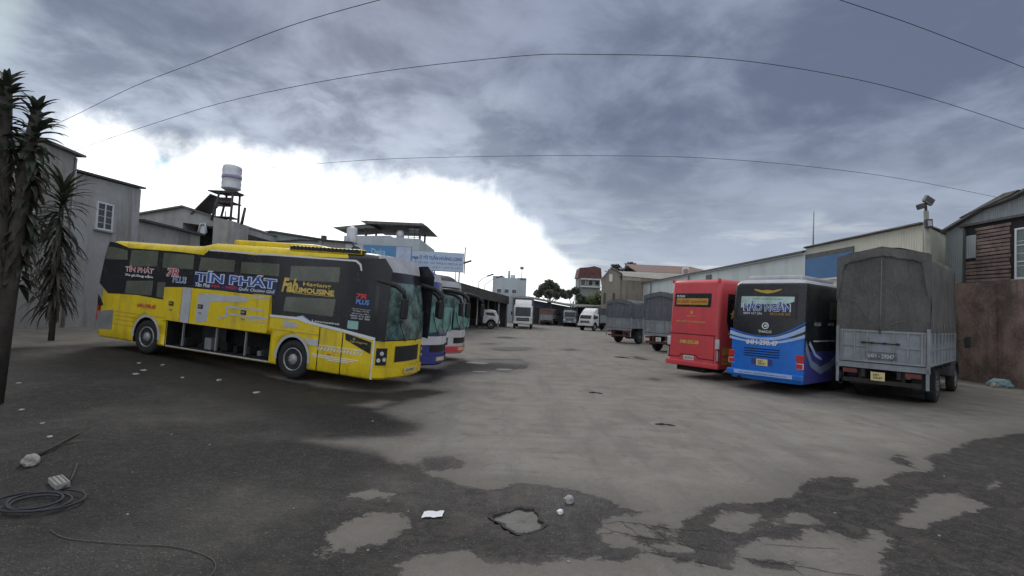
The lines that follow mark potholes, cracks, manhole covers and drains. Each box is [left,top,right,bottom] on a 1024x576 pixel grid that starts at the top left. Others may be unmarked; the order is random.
crack [607,521,721,568]
pothole [488,506,547,535]
